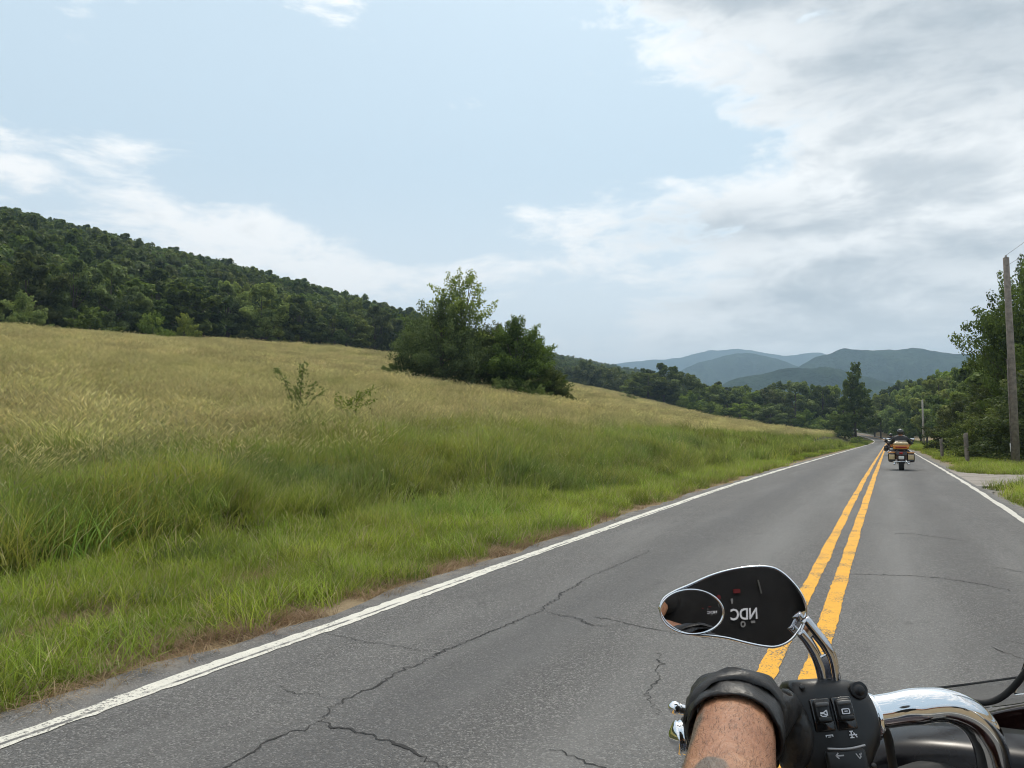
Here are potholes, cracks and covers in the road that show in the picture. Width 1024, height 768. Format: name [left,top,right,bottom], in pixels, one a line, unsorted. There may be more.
crack [644,653,665,715]
crack [223,553,645,768]
